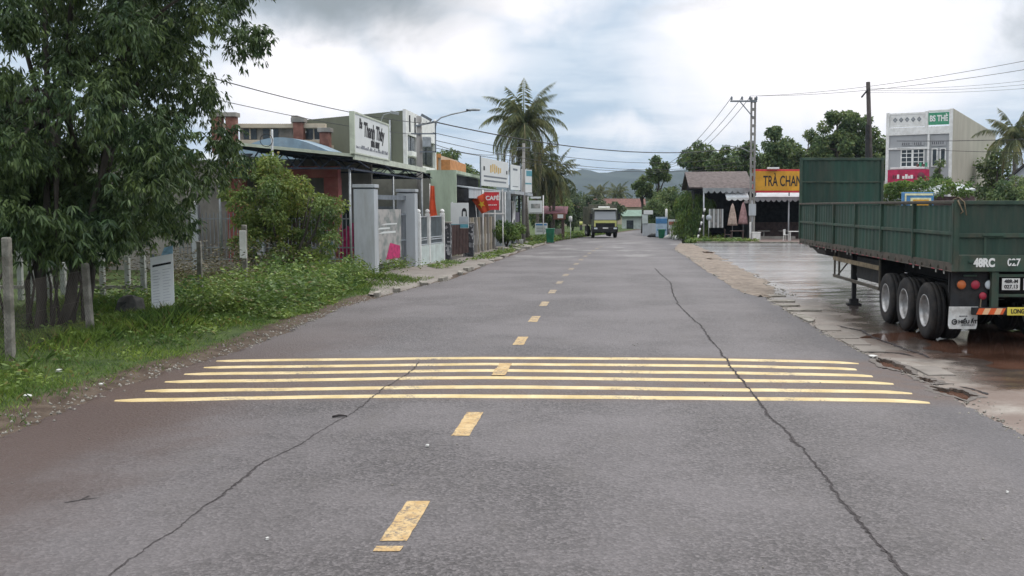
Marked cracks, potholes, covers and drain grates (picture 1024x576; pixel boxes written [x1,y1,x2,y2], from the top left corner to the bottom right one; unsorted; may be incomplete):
crack [108,362,419,576]
crack [656,269,910,576]
pothole [908,375,945,384]
pothole [923,385,987,401]
pothole [868,356,918,375]
